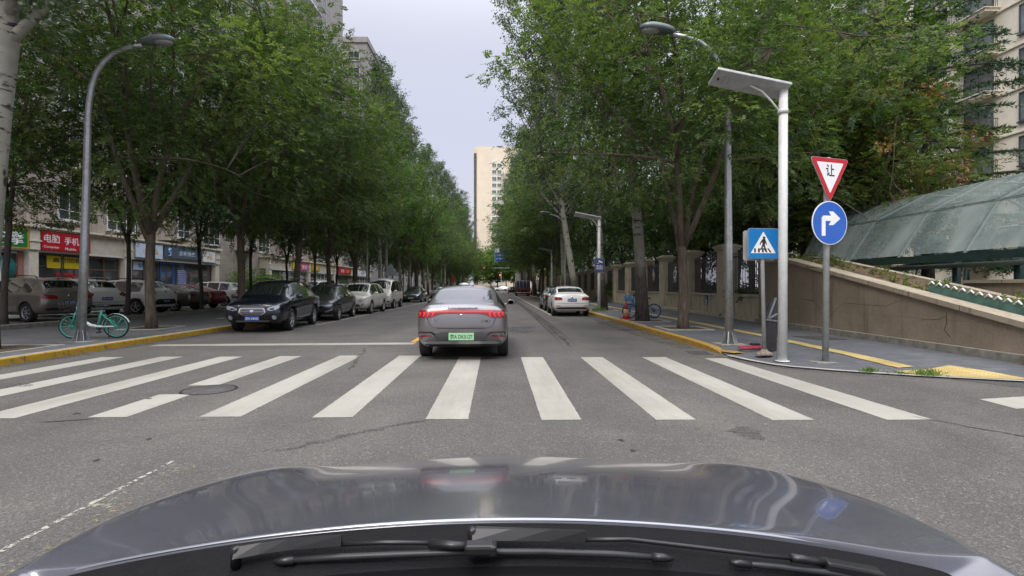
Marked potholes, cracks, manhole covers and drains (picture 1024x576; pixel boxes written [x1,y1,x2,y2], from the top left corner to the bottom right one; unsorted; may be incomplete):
manhole cover [179,384,238,395]
